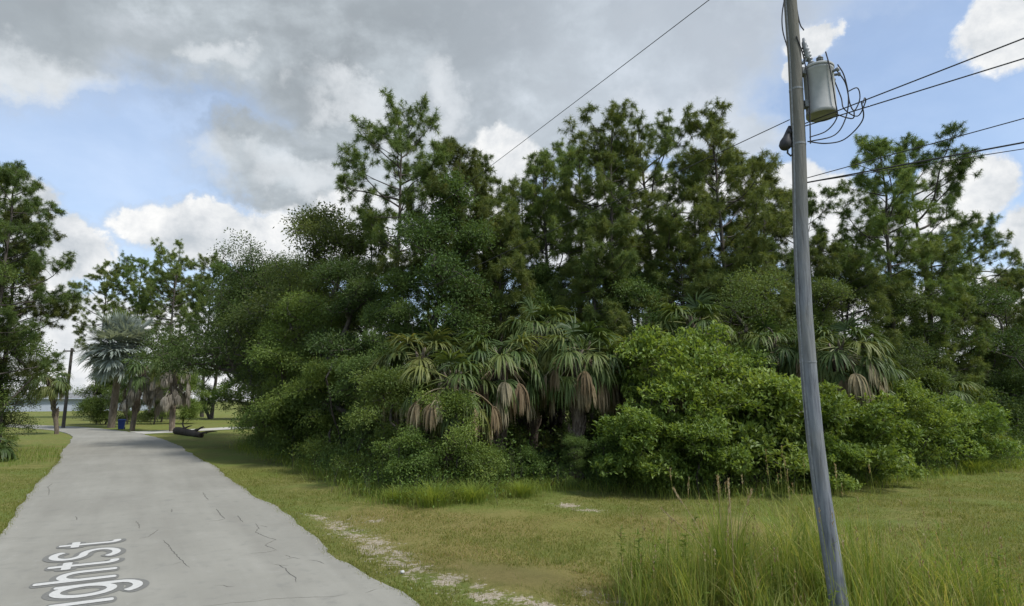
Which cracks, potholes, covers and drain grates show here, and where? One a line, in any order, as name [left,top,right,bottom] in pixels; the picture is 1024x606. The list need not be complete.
crack [203,493,333,605]
